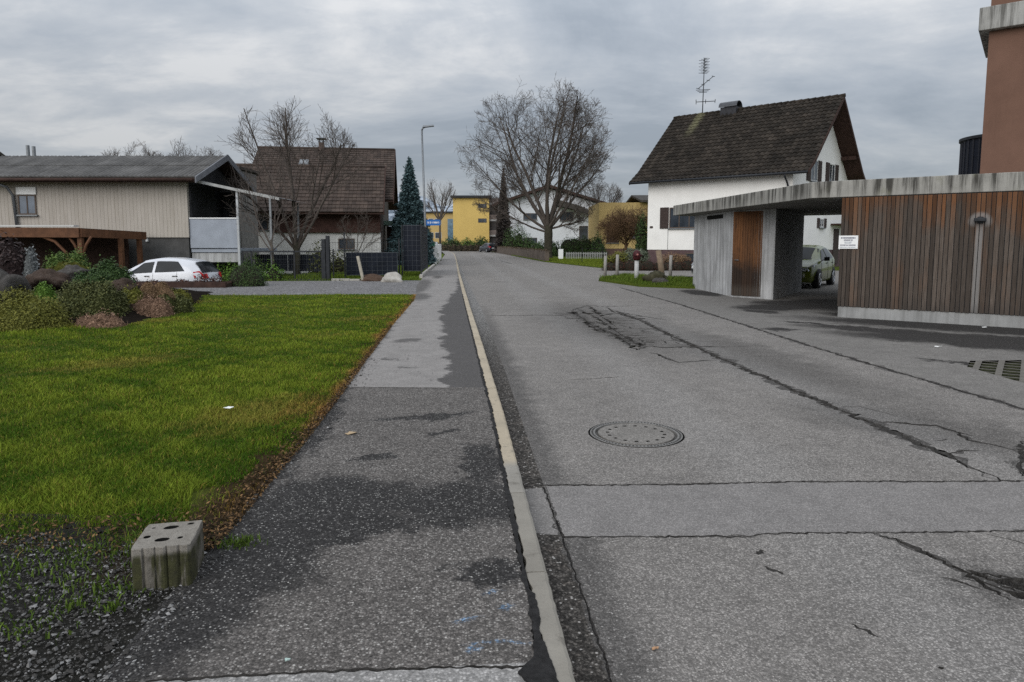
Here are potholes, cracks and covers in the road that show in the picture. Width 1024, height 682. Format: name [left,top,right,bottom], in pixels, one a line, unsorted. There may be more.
crack [852,624,878,637]
manhole cover [588,421,685,448]
crack [754,549,785,583]
crack [872,533,1024,600]
crack [497,305,1024,482]
